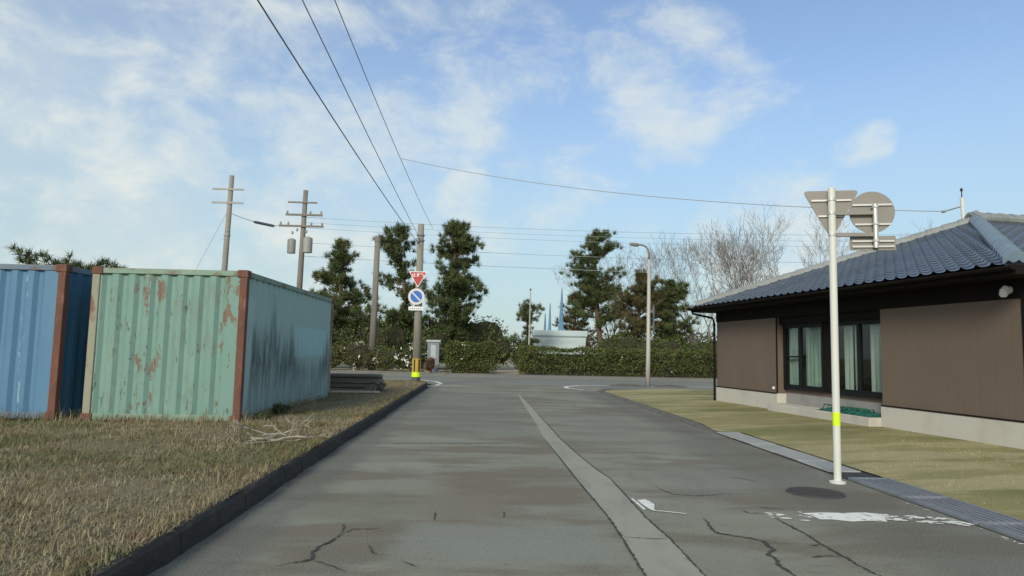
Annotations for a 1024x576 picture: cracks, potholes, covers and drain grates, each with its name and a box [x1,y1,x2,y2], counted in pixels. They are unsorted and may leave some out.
manhole cover [786,487,846,499]
crack [703,506,881,576]
drain grate [904,496,1024,526]
crack [279,524,384,572]
drain grate [979,522,1024,542]
drain grate [848,477,947,499]
